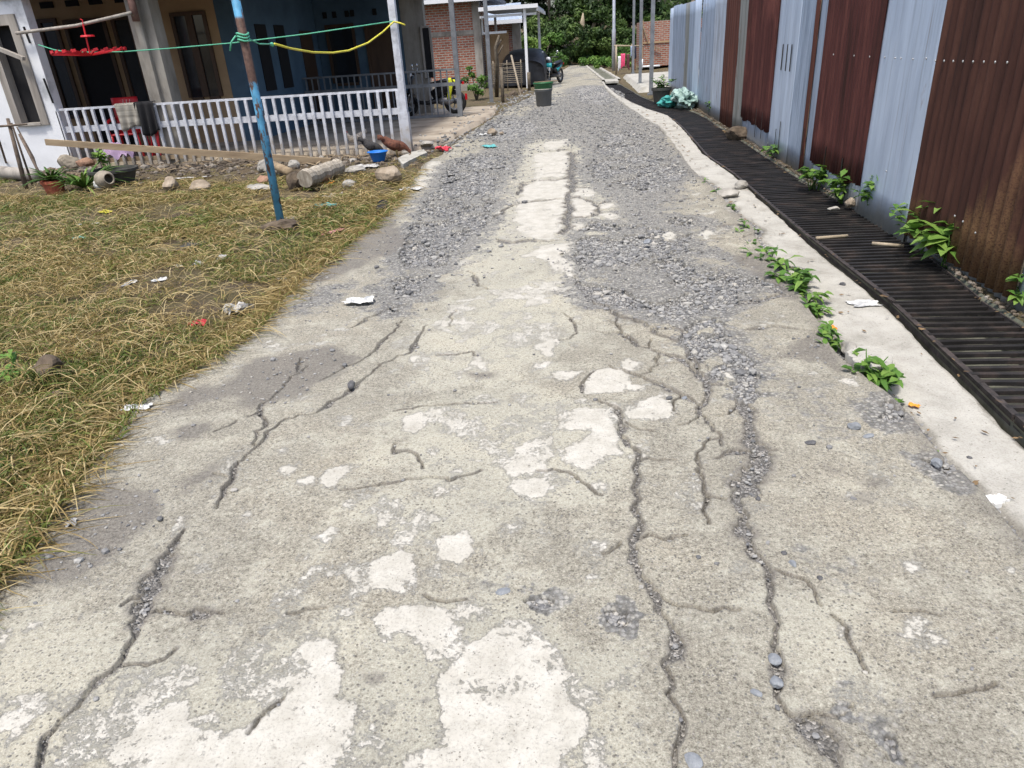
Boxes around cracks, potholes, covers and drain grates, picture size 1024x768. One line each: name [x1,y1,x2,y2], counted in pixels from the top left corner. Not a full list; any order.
drain grate [668,113,707,121]
pothole [605,612,627,627]
drain grate [765,198,888,243]
drain grate [693,138,759,156]
drain grate [675,119,718,129]
drain grate [809,234,981,308]
drain grate [683,127,727,140]
pothole [525,599,554,610]
crack [601,305,841,768]
drain grate [707,153,788,175]
